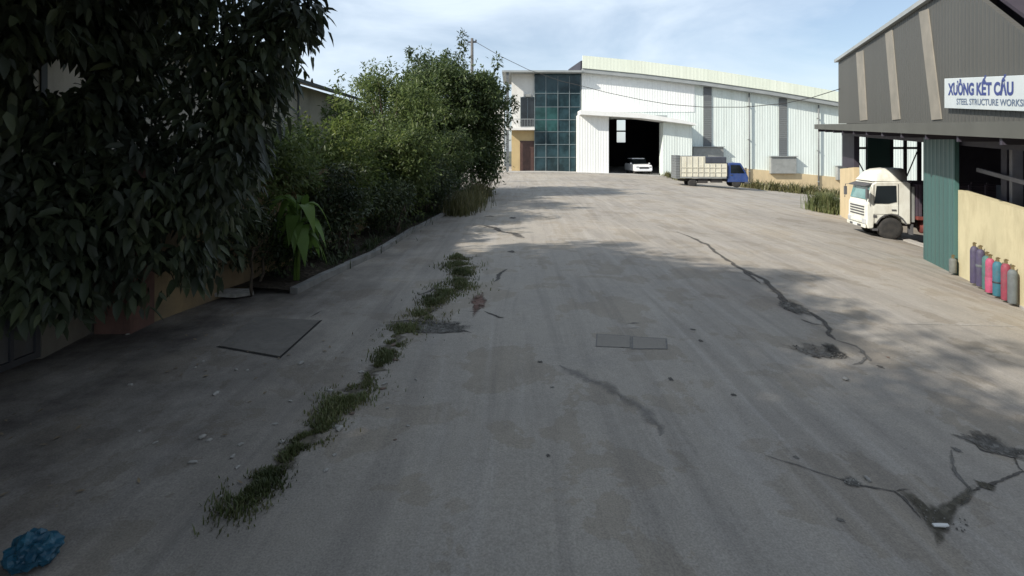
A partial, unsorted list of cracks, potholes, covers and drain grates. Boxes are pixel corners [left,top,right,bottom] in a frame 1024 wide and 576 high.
crack [484,216,525,238]
pothole [793,344,846,359]
manhole cover [596,334,631,348]
crack [859,485,921,518]
crack [678,232,871,365]
crack [951,445,1024,506]
crack [766,455,842,480]
manhole cover [631,336,668,349]
manhole cover [216,317,322,358]
